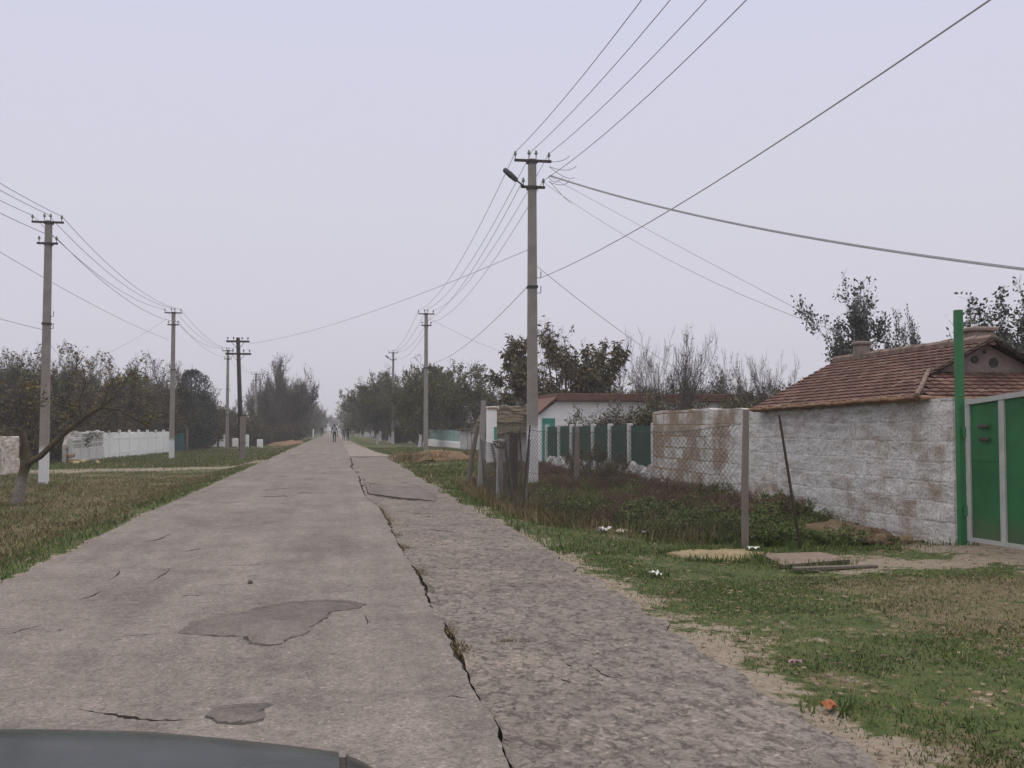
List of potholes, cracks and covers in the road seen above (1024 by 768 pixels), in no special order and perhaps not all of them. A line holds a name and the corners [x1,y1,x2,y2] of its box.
crack [79,709,194,721]
